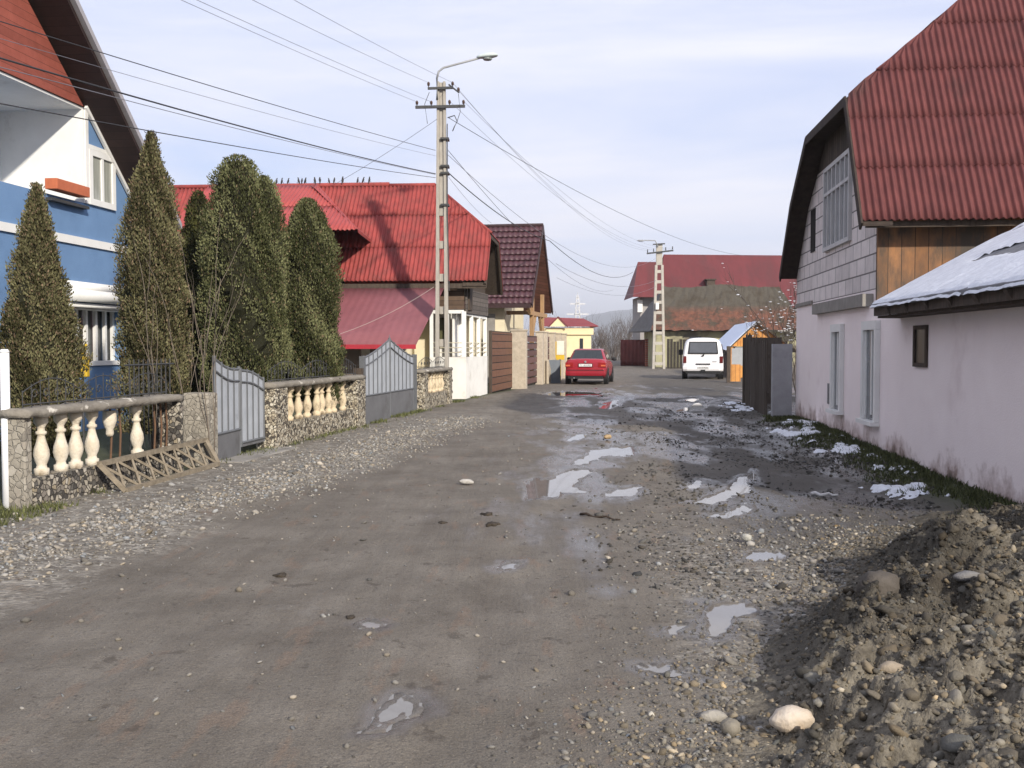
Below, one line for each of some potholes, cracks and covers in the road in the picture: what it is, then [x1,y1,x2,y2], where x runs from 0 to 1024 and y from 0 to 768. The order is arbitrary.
pothole [701,598,761,640]
pothole [516,468,597,501]
pothole [357,692,424,734]
pothole [600,484,643,500]
pothole [571,447,639,465]
pothole [635,662,707,680]
pothole [679,468,759,506]
pothole [659,621,697,635]
pothole [739,551,789,562]
